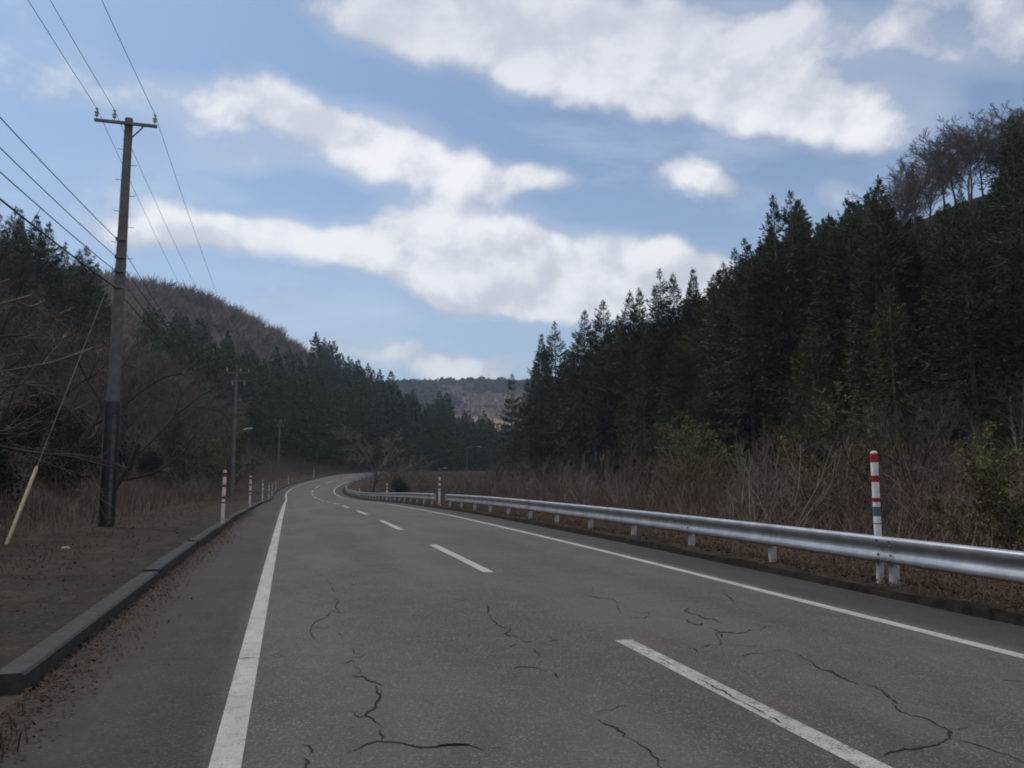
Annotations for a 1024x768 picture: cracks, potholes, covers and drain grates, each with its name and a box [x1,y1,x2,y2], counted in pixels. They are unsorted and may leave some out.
crack [660,608,781,723]
crack [599,705,666,768]
crack [455,599,561,678]
crack [301,572,501,751]
crack [739,650,1021,762]
